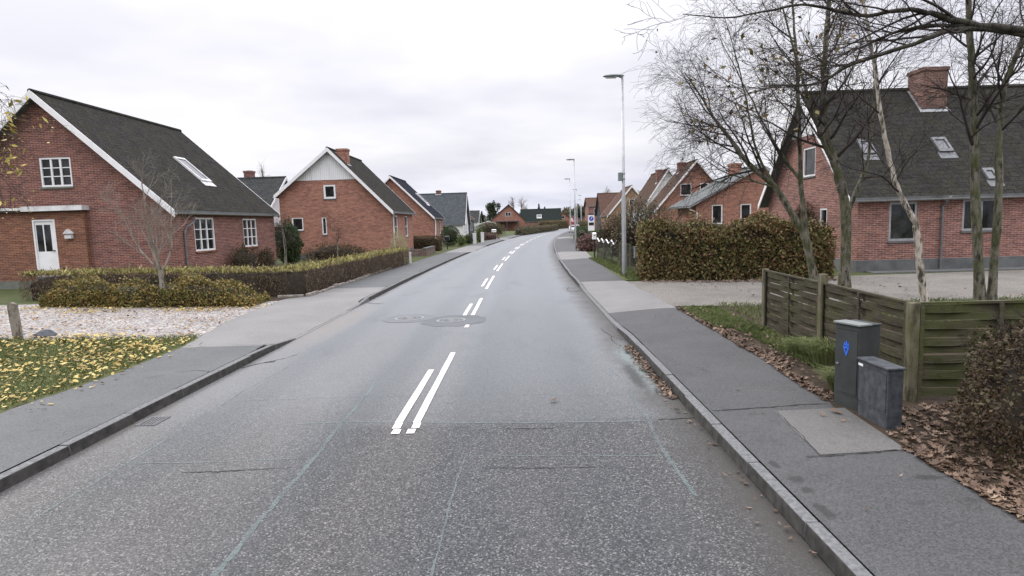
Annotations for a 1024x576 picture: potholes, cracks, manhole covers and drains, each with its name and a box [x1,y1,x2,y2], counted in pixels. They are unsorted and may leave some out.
drain grate [134,416,171,426]
manhole cover [420,315,486,326]
manhole cover [381,314,436,323]
